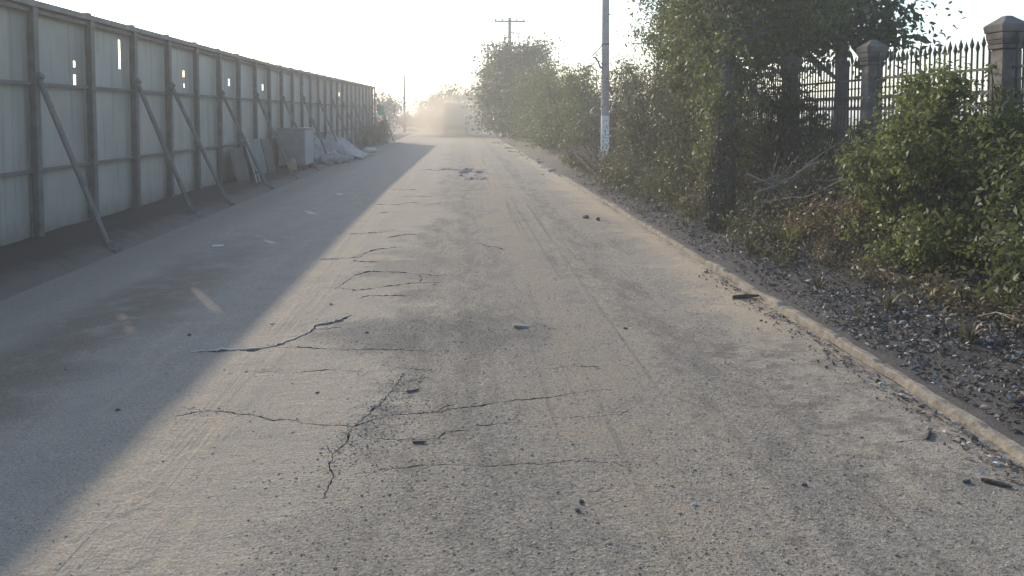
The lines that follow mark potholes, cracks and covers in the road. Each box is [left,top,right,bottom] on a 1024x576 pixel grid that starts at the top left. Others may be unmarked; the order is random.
crack [190,230,443,353]
crack [178,375,612,497]
pothole [421,168,492,180]
